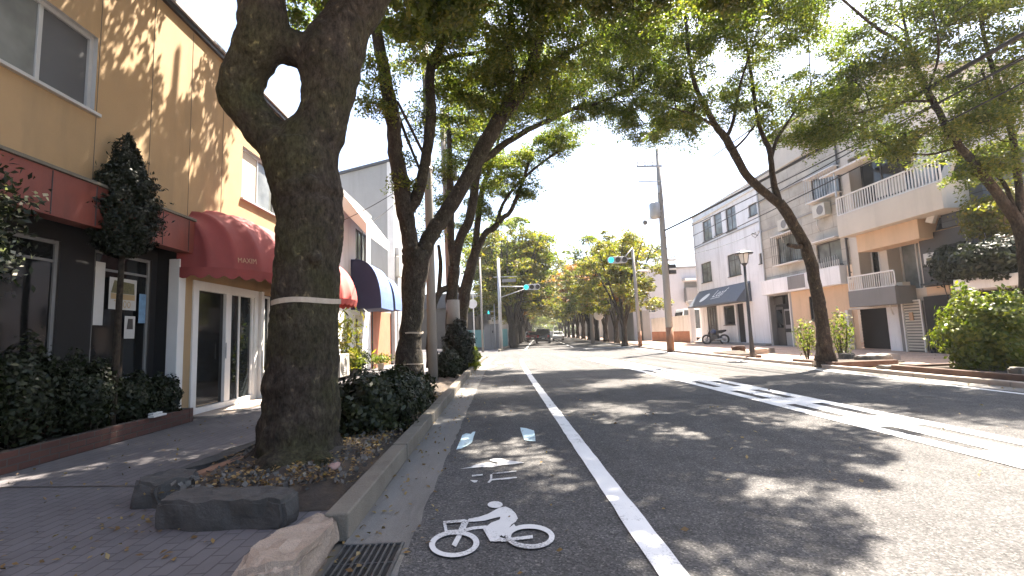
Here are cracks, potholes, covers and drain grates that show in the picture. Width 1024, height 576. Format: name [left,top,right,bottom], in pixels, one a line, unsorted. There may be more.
drain grate [320,541,405,576]
